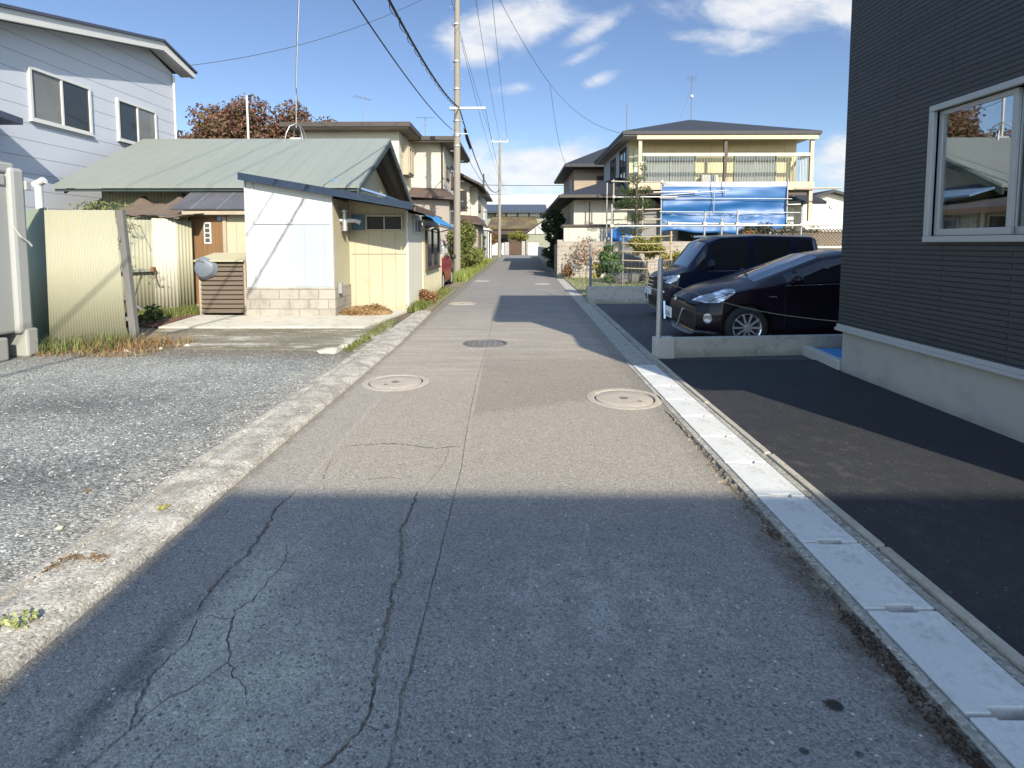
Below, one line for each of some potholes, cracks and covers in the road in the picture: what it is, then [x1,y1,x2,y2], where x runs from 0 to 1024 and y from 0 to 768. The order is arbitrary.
manhole cover [463,339,508,348]
manhole cover [587,388,662,410]
manhole cover [361,374,429,391]
crack [83,307,495,768]
